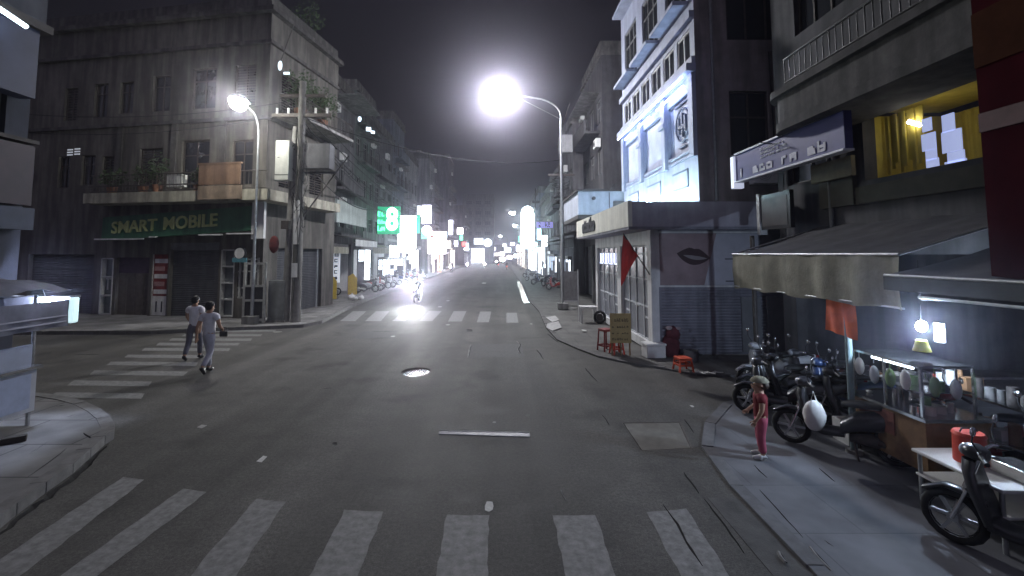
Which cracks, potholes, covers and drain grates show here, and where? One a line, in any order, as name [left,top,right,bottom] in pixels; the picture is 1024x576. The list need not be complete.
crack [664,473,745,566]
manhole cover [401,368,431,376]
